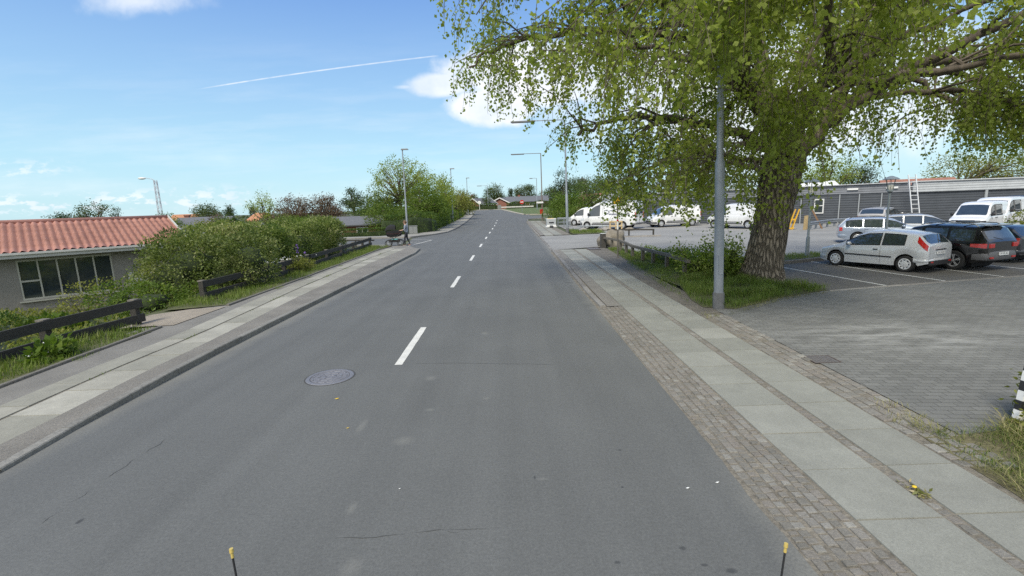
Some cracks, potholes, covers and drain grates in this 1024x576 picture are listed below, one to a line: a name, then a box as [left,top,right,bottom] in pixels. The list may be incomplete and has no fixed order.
crack [341,529,465,538]
manhole cover [304,369,356,386]
manhole cover [805,355,841,363]
